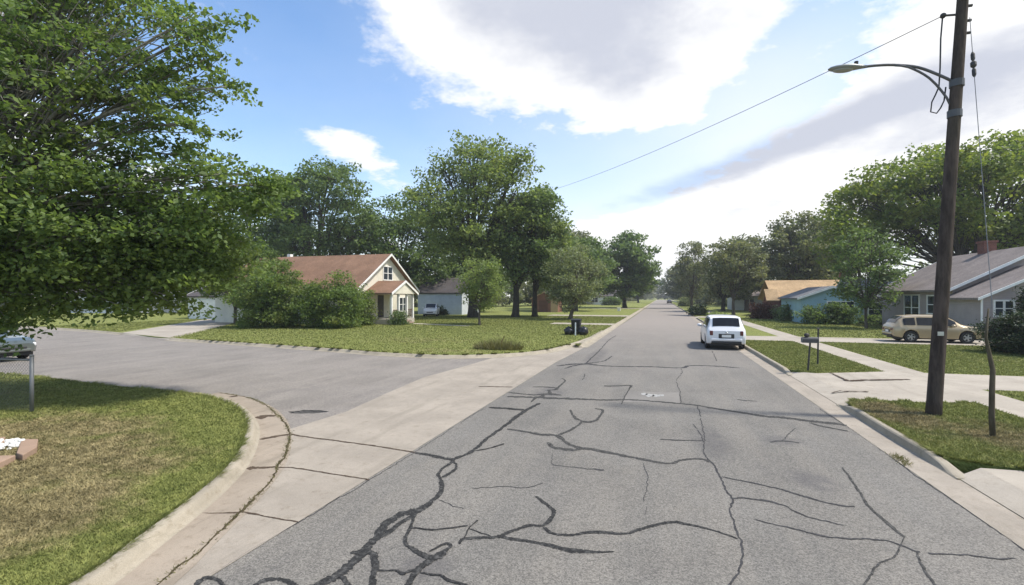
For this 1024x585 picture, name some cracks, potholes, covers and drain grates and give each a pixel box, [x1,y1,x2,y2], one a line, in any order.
crack [558,336,737,380]
crack [440,369,1017,585]
